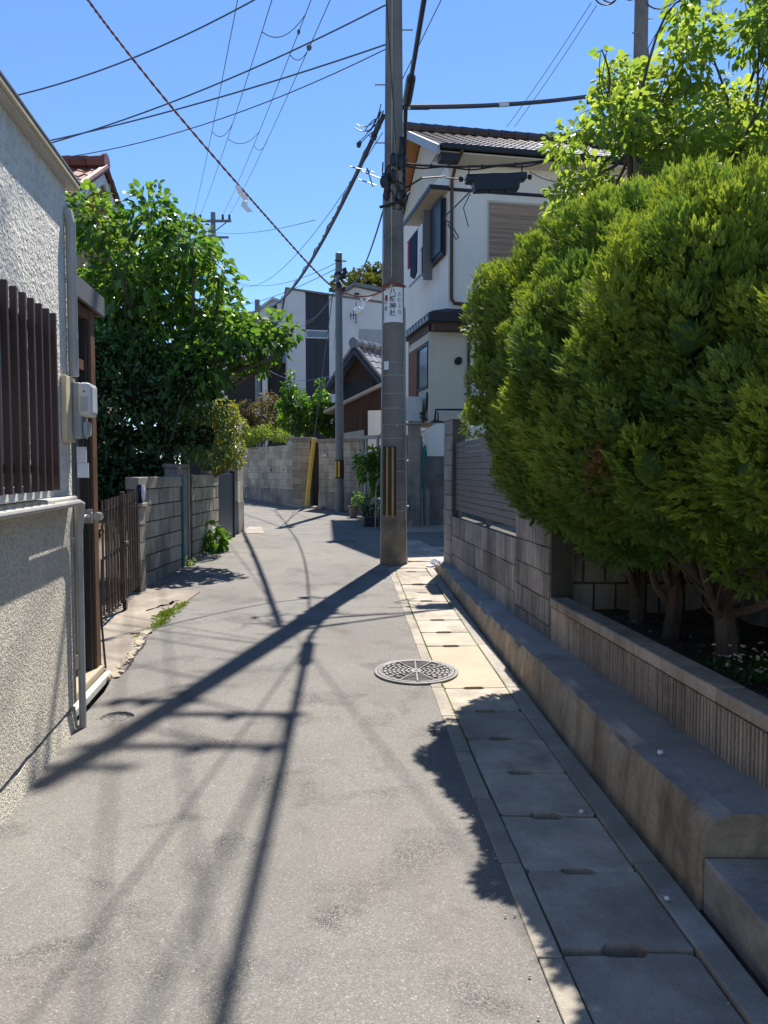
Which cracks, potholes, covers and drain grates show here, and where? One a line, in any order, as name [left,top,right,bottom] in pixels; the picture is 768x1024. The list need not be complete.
manhole cover [374,659,458,685]
